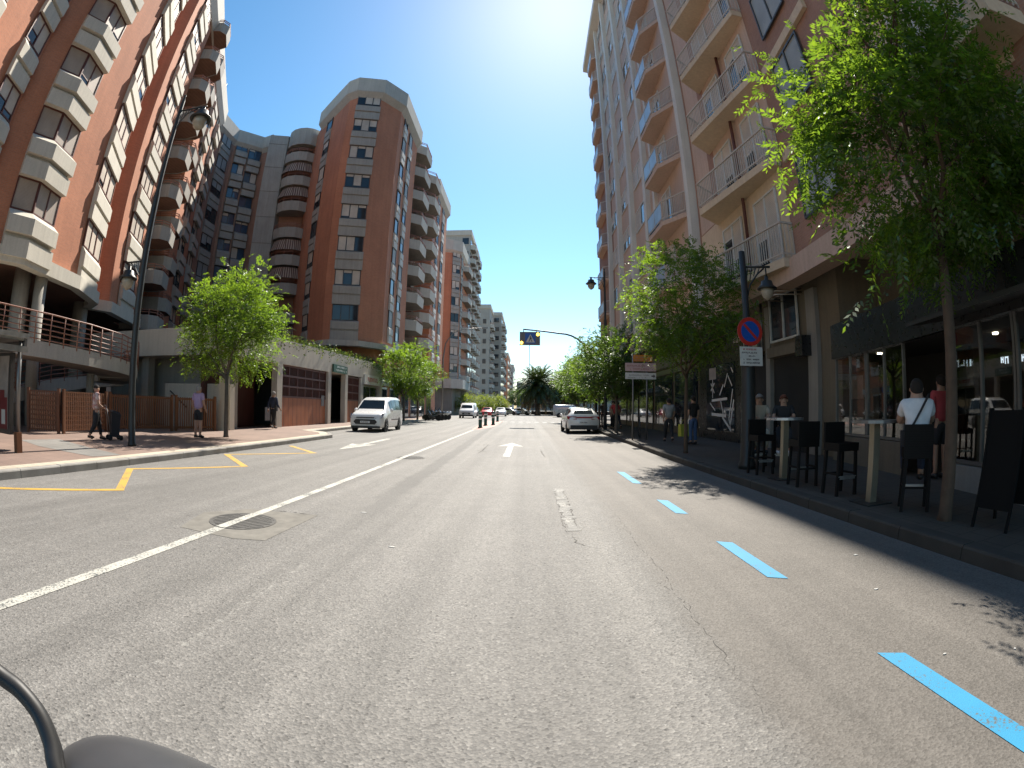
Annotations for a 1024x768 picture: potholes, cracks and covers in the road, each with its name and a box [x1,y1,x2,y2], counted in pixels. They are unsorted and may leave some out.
manhole cover [181,509,317,540]
crack [605,504,782,723]
